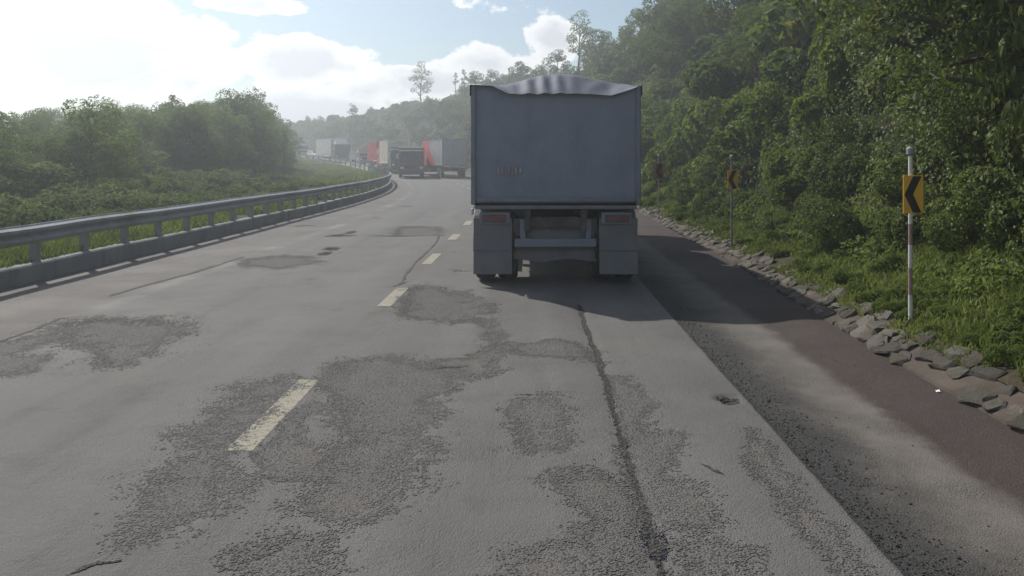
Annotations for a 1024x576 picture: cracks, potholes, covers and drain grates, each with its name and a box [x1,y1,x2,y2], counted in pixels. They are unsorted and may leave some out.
pothole [716,396,740,405]
crack [64,559,124,576]
crack [577,304,668,576]
